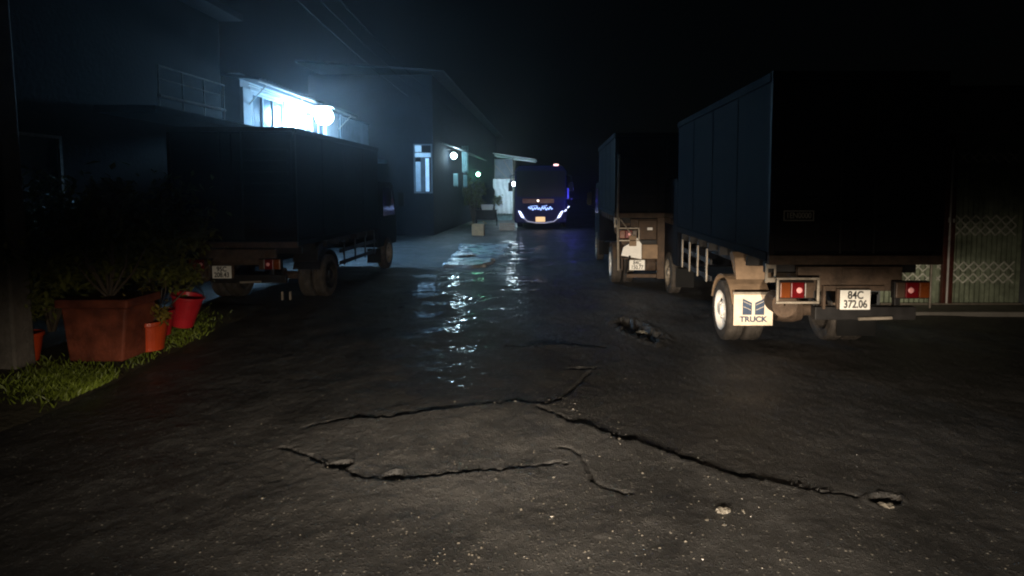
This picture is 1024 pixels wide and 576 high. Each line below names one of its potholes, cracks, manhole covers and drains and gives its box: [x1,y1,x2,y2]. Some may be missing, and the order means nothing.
pothole [870,494,902,505]
pothole [617,319,662,343]
